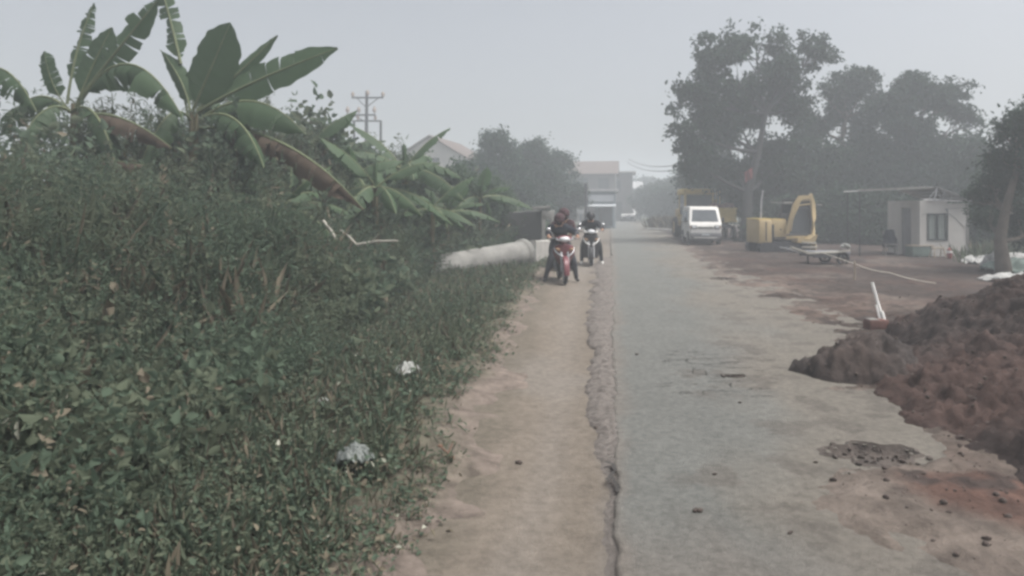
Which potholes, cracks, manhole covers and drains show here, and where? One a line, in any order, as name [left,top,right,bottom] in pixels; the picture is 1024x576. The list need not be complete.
crack [584,257,621,576]
pothole [816,440,933,468]
